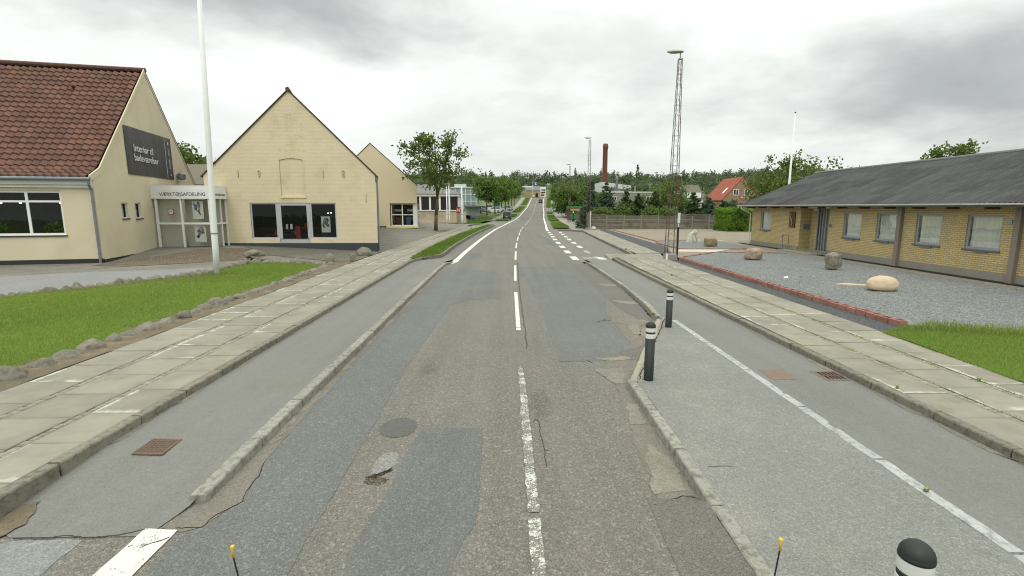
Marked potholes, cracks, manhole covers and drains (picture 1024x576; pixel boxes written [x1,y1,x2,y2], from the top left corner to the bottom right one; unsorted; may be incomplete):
drain grate [810,371,851,381]
crack [517,263,528,348]
manhole cover [131,438,182,455]
manhole cover [379,418,417,437]
manhole cover [759,369,797,380]
pothole [363,468,394,486]
